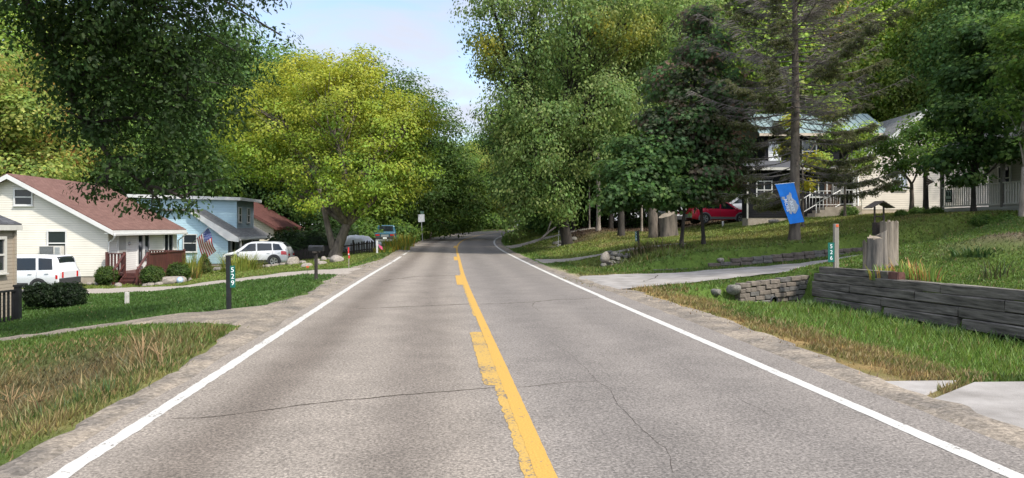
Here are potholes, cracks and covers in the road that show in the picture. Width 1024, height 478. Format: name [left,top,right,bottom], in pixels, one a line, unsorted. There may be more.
crack [199,382,563,418]
crack [358,297,596,311]
